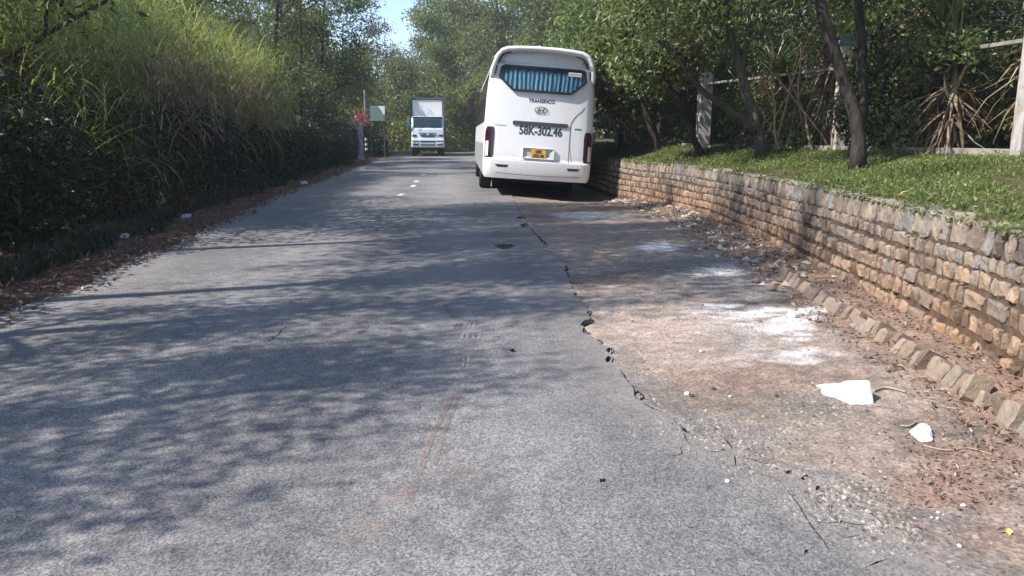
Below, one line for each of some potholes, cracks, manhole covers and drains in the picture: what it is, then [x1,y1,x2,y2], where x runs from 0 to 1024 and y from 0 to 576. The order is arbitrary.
crack [620,370,687,456]
crack [580,319,603,345]
crack [708,438,879,550]
